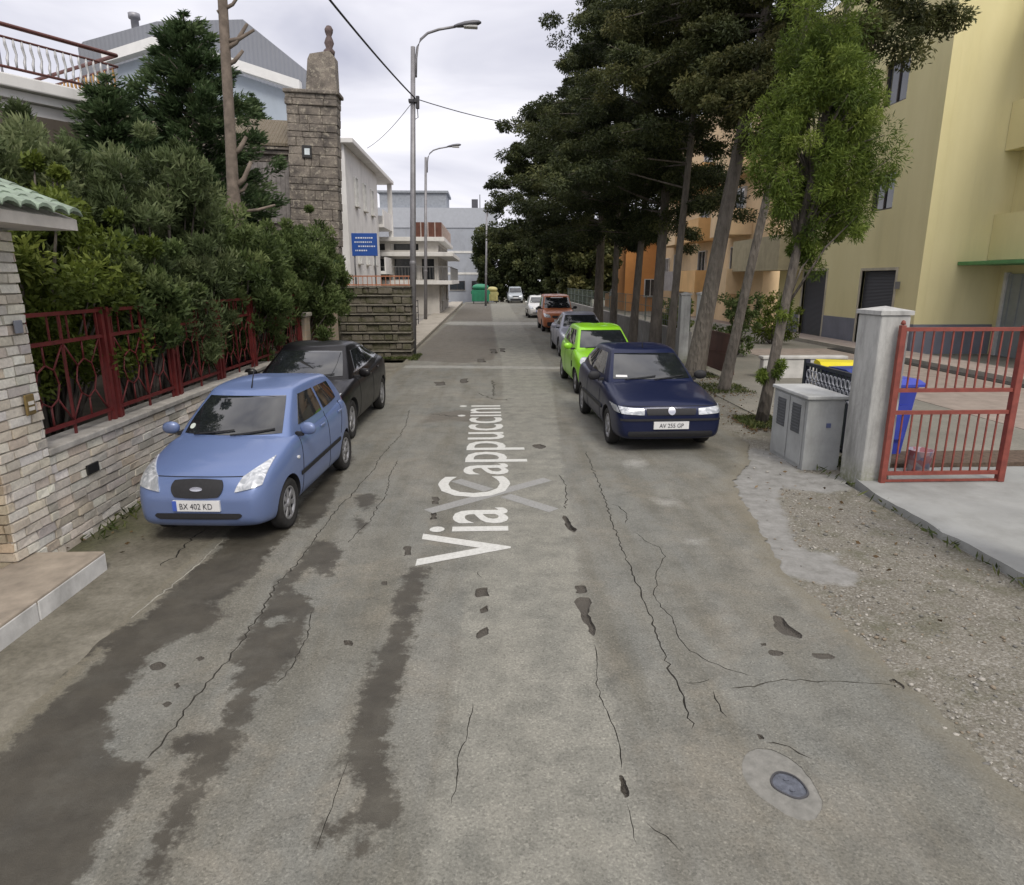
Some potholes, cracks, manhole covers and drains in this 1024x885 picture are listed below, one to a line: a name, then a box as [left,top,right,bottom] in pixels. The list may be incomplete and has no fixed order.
pothole [619,775,629,798]
pothole [773,616,802,639]
pothole [574,597,596,636]
crack [451,708,473,805]
manhole cover [742,748,823,821]
crack [595,647,622,768]
crack [585,452,896,728]
pothole [475,587,489,597]
